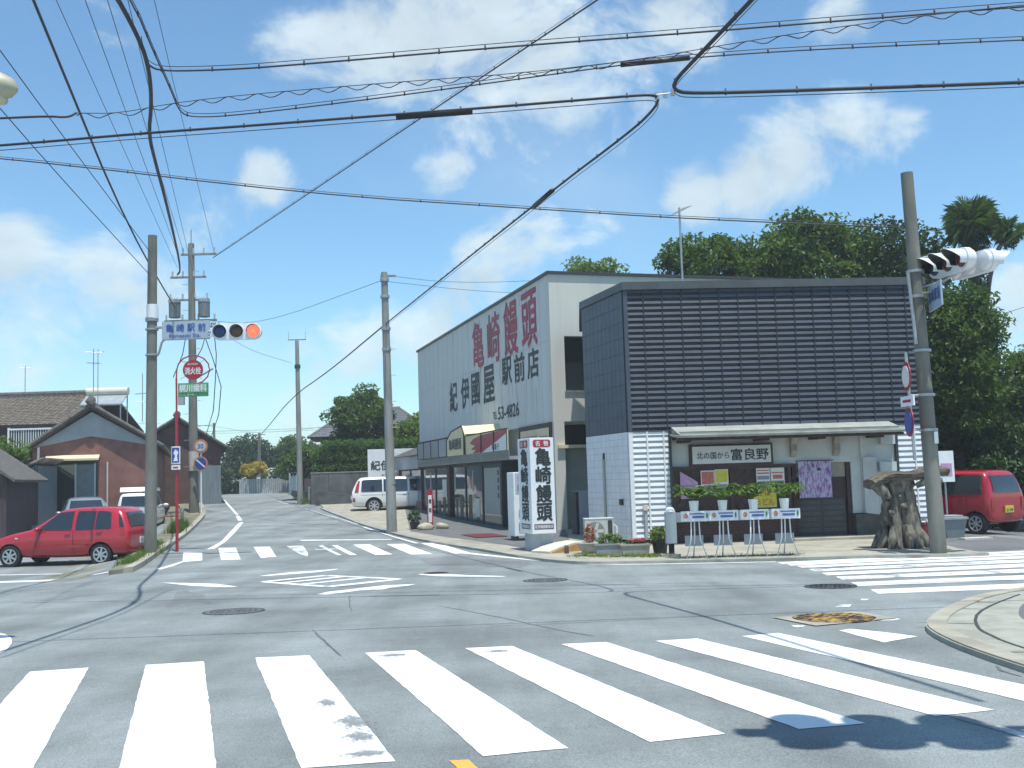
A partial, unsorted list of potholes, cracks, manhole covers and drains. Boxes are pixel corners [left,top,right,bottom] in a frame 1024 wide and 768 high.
manhole cover [774,611,896,626]
crack [312,629,341,656]
